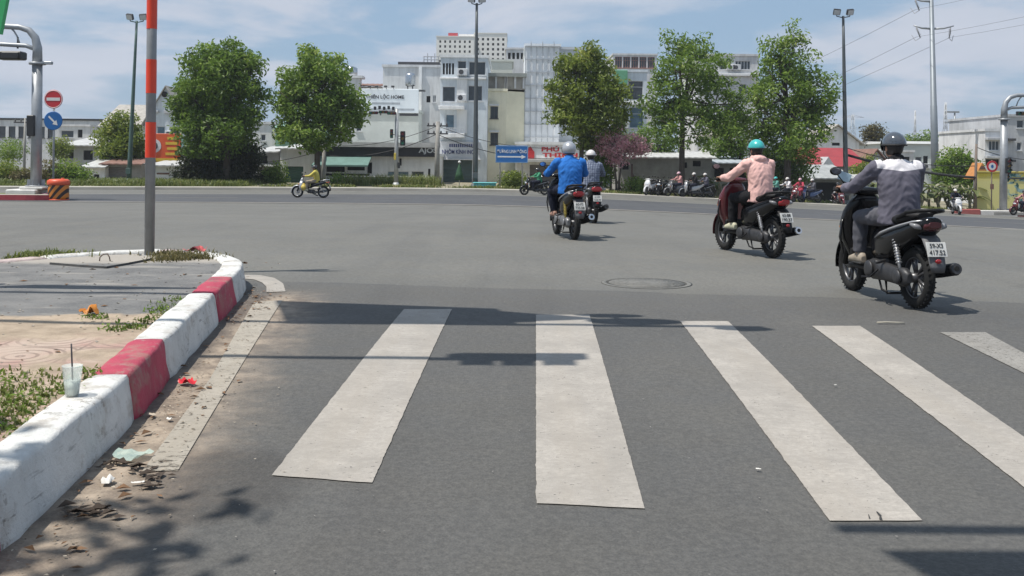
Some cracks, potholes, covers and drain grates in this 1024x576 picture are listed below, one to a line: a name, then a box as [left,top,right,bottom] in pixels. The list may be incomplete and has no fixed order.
manhole cover [601,277,692,289]
